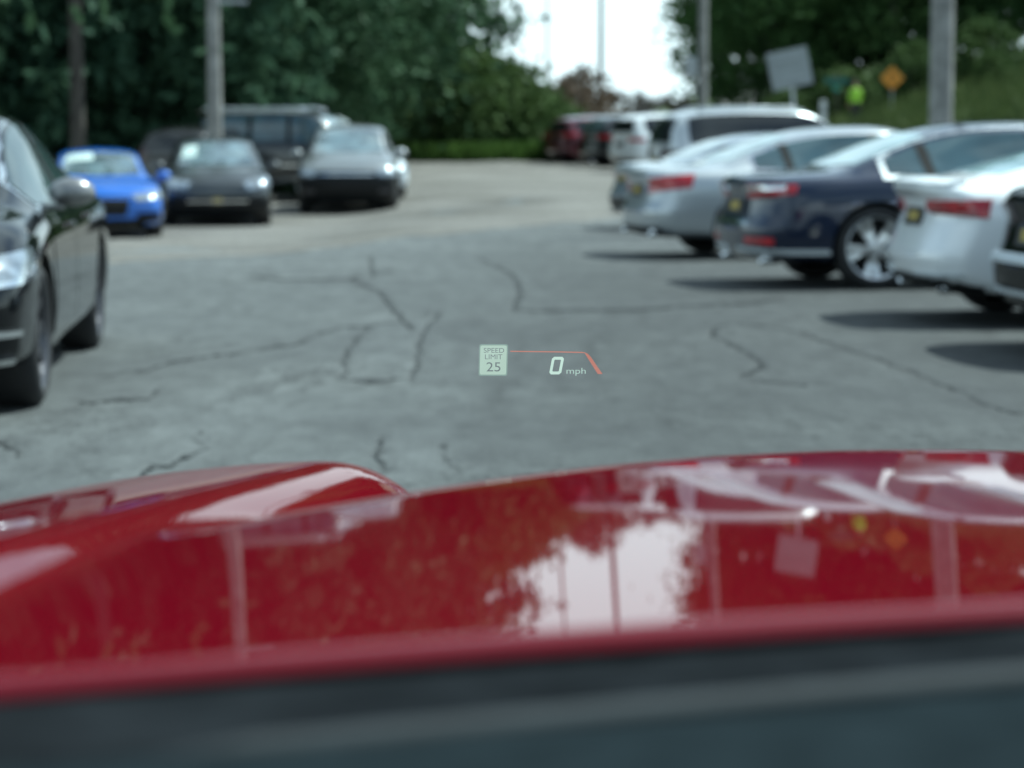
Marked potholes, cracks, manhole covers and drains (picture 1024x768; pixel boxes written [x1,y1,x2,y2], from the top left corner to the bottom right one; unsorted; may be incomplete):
crack [0,440,21,456]
crack [141,426,212,476]
crack [474,257,1024,414]
crack [74,256,444,403]
crack [374,437,387,468]
